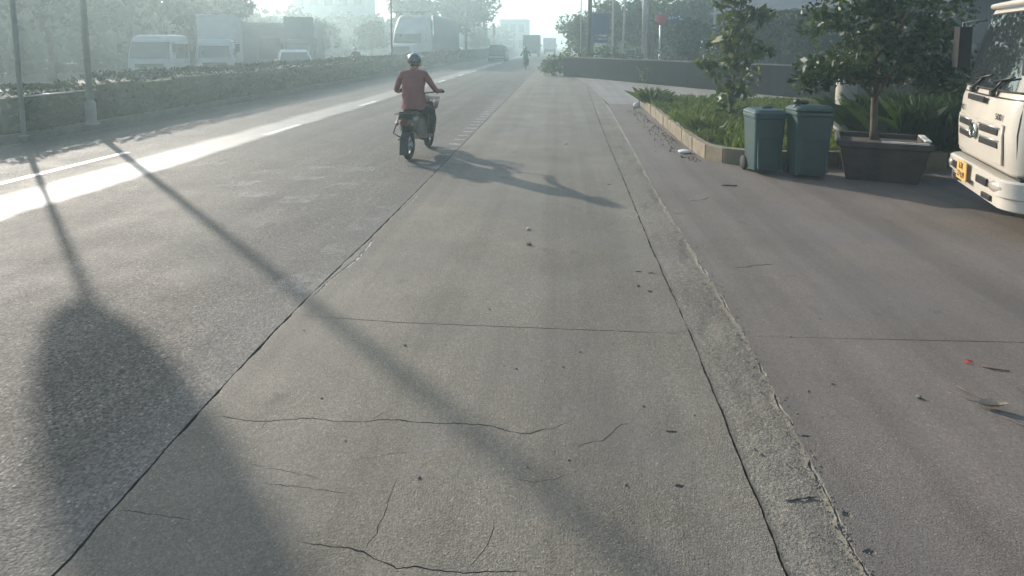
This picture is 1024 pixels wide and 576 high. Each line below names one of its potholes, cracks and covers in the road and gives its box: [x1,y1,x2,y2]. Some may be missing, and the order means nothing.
crack [200,411,570,434]
crack [297,478,526,574]
